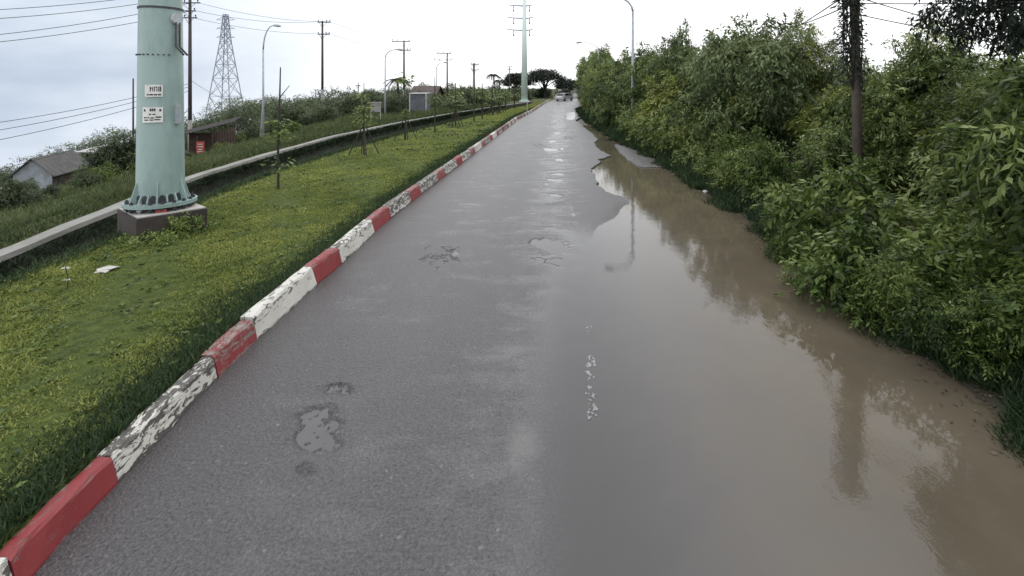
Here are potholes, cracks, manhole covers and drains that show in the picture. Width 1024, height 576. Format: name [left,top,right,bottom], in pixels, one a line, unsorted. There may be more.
pothole [524,234,574,257]
pothole [314,382,365,396]
pothole [275,400,358,458]
